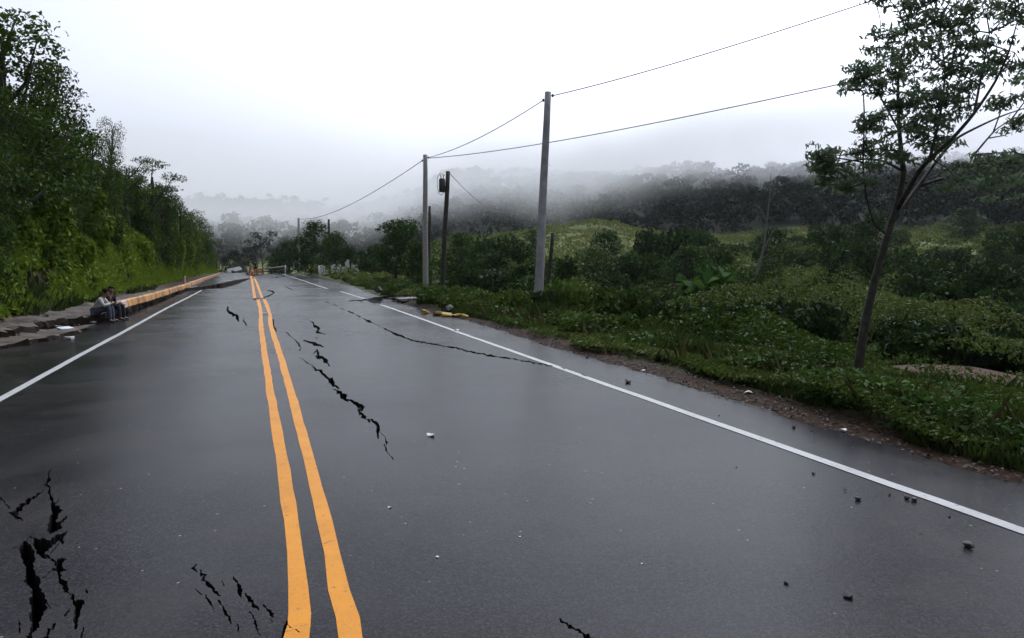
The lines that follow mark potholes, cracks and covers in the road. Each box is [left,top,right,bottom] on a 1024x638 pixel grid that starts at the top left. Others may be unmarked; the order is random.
crack [0,469,88,638]
crack [191,564,298,638]
crack [559,618,591,638]
crack [186,276,292,326]
crack [272,299,585,460]
